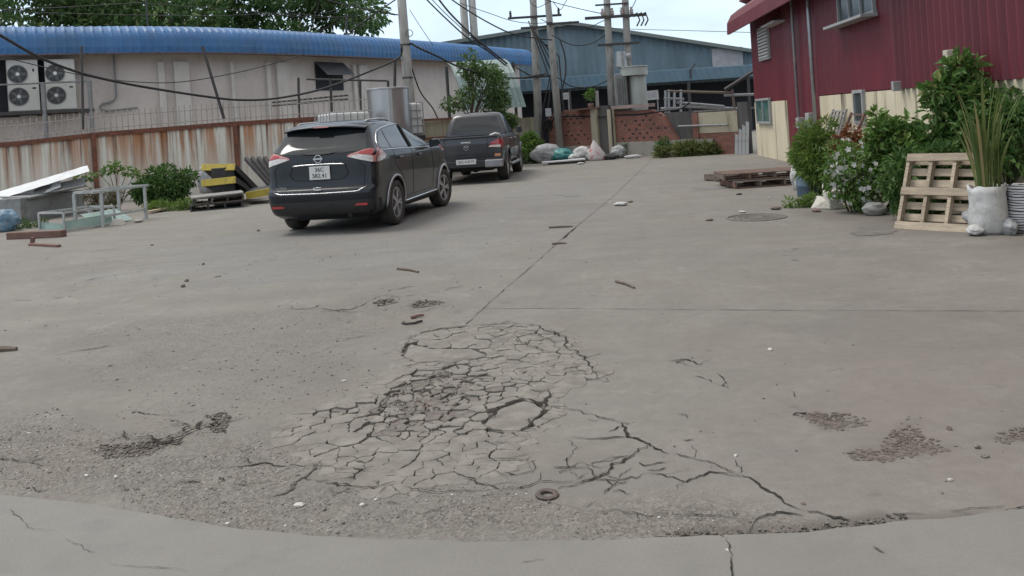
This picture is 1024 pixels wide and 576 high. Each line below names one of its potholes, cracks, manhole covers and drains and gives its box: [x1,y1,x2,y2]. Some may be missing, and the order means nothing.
crack [122,409,243,445]
crack [367,334,470,414]
manhole cover [725,213,787,221]
pothole [993,427,1024,444]
pothole [409,299,445,308]
pothole [843,416,962,463]
pothole [794,411,872,431]
crack [181,389,849,576]
crack [12,511,179,569]
crack [671,359,728,388]
crack [285,286,609,382]
